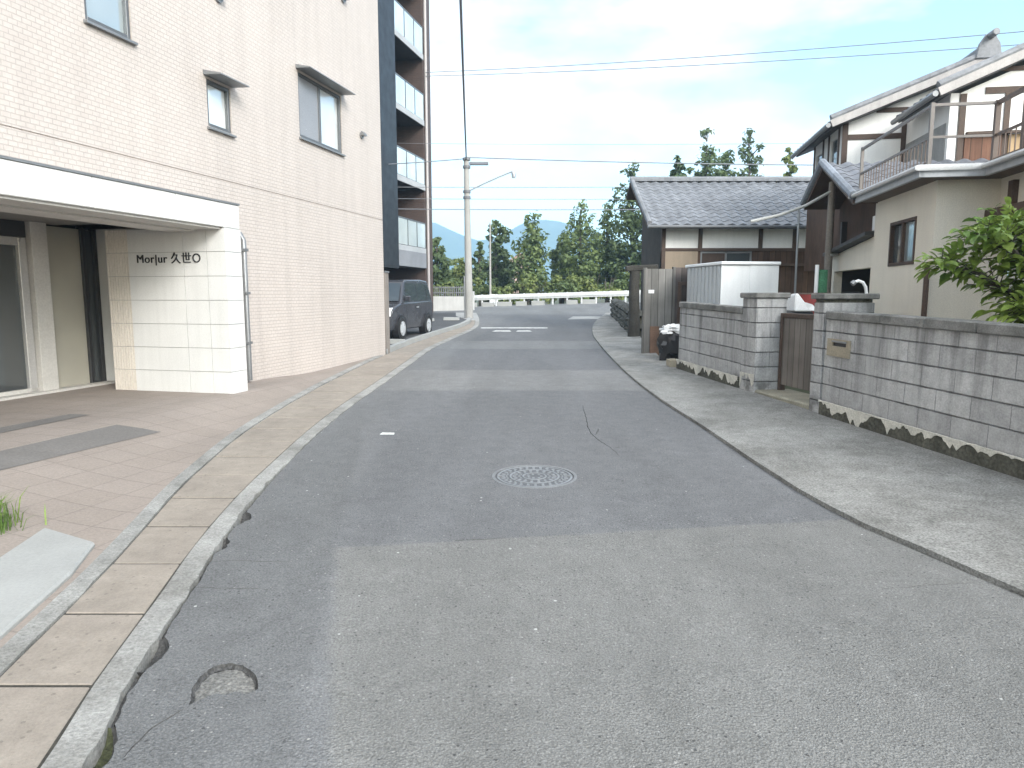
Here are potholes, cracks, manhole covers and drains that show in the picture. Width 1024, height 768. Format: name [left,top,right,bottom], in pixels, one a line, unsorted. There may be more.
crack [111,493,285,757]
pothole [137,637,169,676]
pothole [189,663,258,705]
manhole cover [492,465,577,489]
